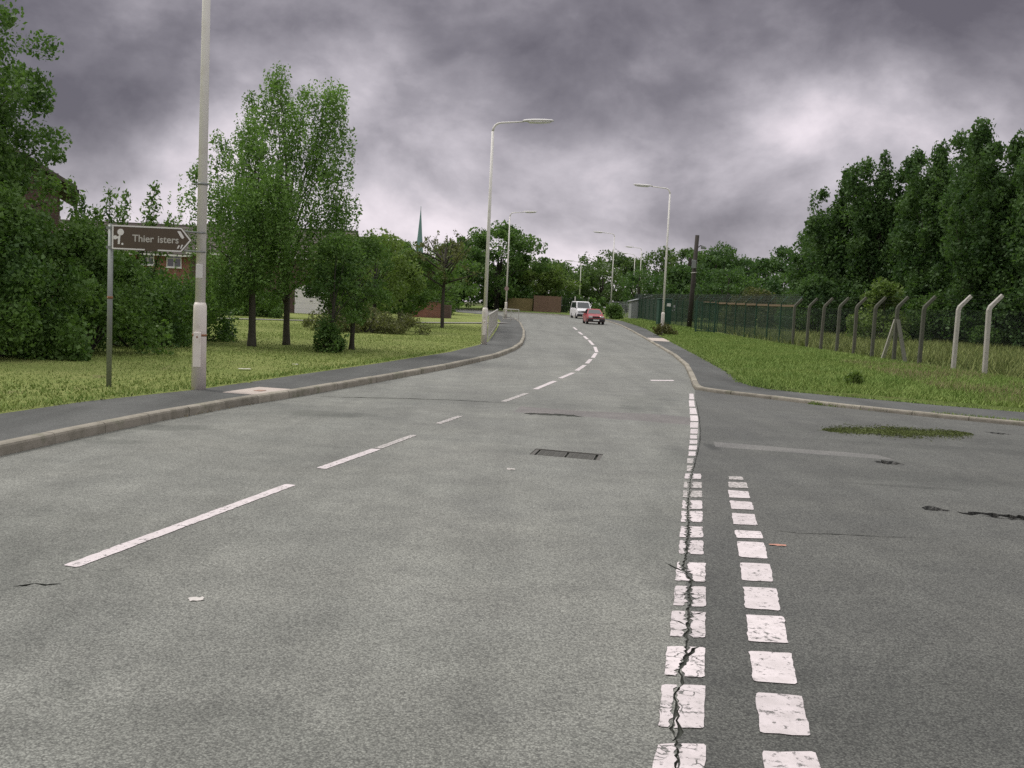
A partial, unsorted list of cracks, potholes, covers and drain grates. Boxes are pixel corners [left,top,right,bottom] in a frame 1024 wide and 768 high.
manhole cover [223,387,288,395]
crack [666,400,702,768]
